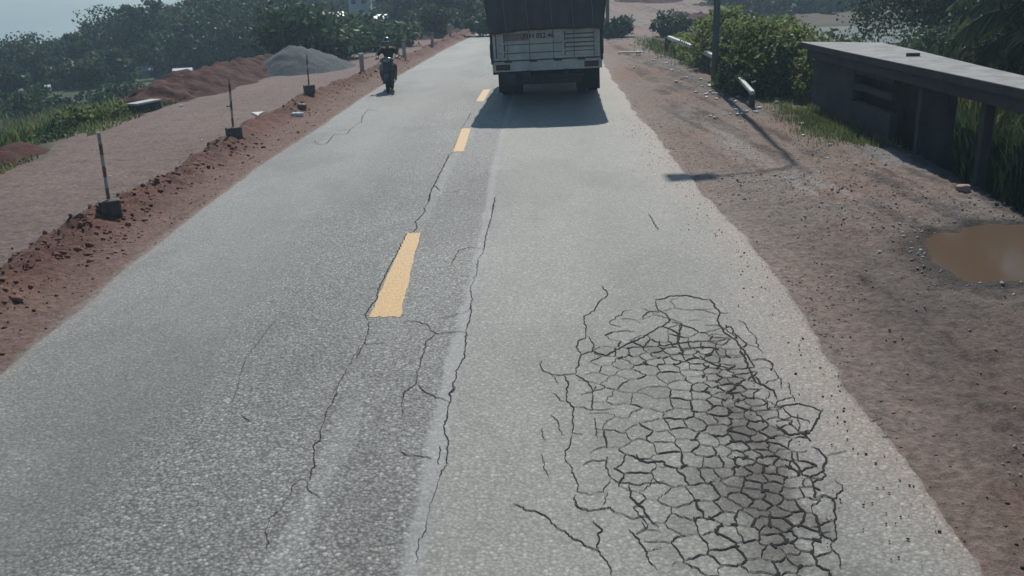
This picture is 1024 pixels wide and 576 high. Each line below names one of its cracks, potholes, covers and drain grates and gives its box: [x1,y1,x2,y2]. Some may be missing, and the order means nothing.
crack [401,198,495,561]
crack [265,113,471,549]
crack [540,286,845,576]
crack [513,503,612,575]
